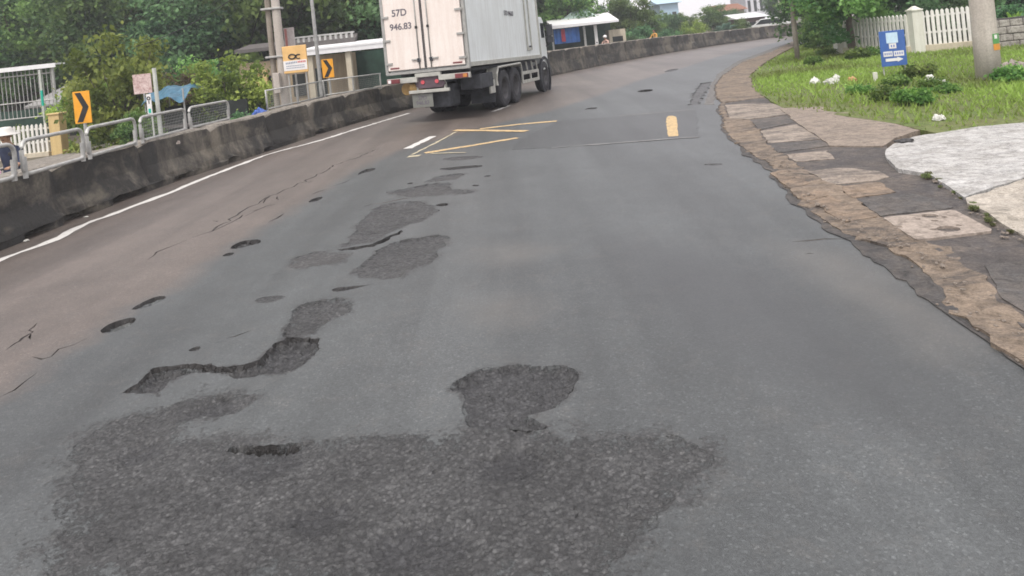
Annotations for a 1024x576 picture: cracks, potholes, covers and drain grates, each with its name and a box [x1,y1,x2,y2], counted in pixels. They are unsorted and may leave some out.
pothole [132,296,166,310]
pothole [123,337,320,395]
pothole [101,318,136,333]
crack [149,150,374,259]
pothole [230,239,261,249]
crack [6,323,37,350]
